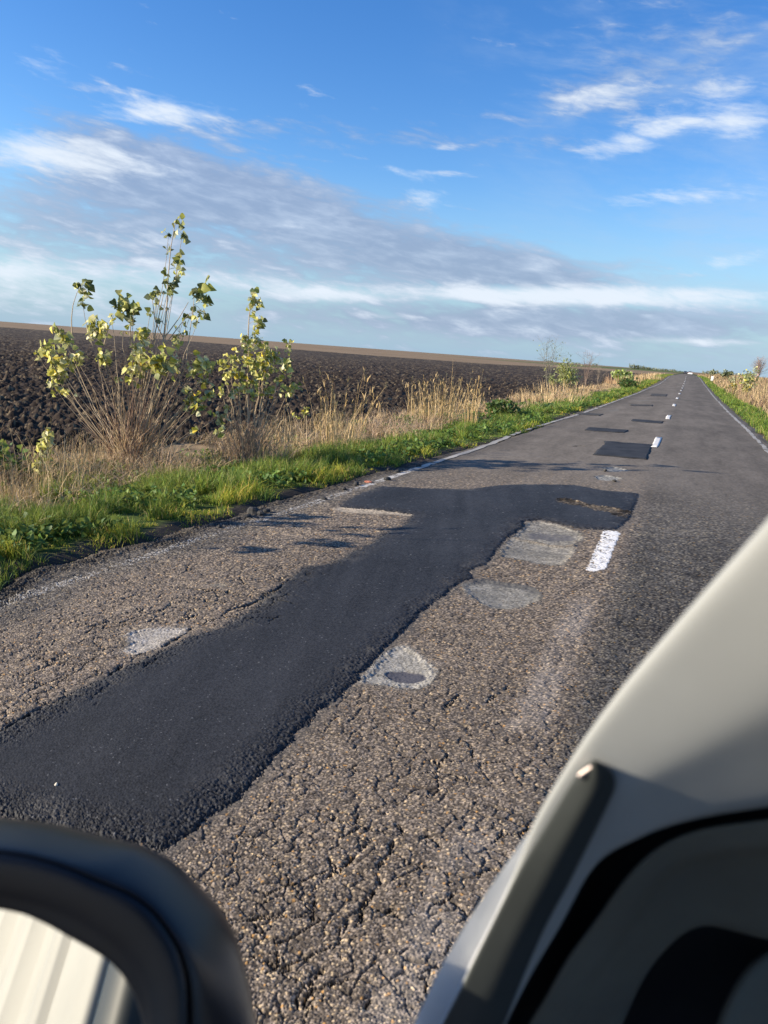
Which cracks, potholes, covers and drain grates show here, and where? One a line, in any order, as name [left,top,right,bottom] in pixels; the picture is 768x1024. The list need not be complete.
crack [0,565,323,732]
pothole [557,497,634,518]
crack [231,742,546,1024]
